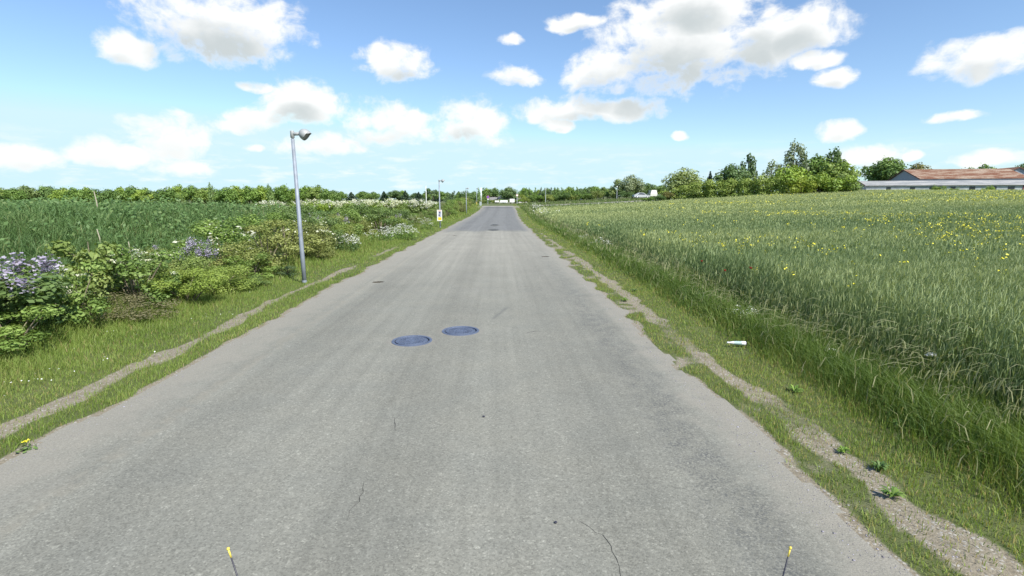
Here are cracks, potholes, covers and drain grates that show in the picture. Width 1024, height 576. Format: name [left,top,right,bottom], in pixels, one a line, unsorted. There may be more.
manhole cover [442,326,479,336]
manhole cover [391,335,432,347]
